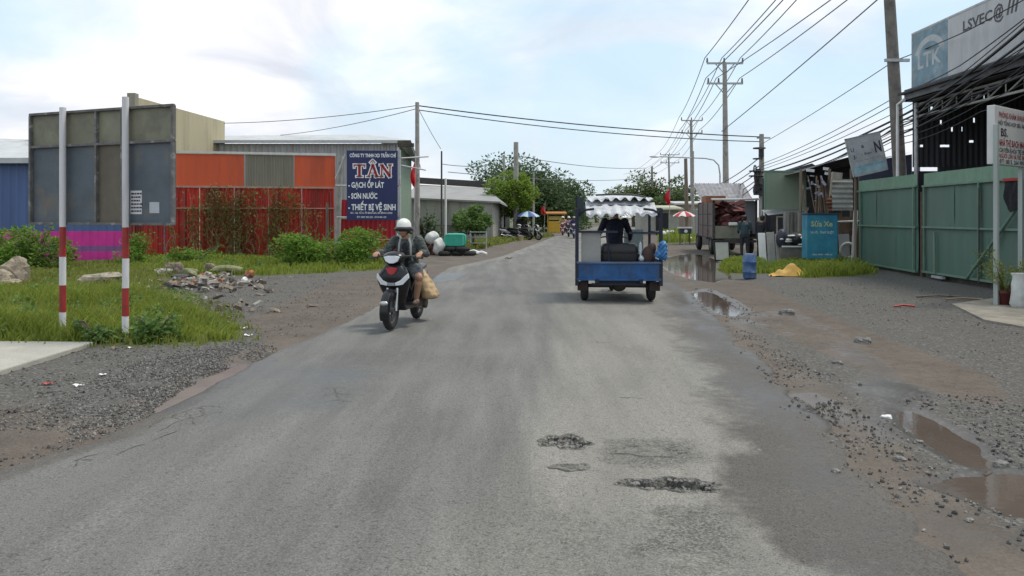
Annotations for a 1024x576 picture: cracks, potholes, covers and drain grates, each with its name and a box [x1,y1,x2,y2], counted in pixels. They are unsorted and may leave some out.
pothole [613,476,725,493]
crack [117,406,222,454]
pothole [537,433,594,450]
